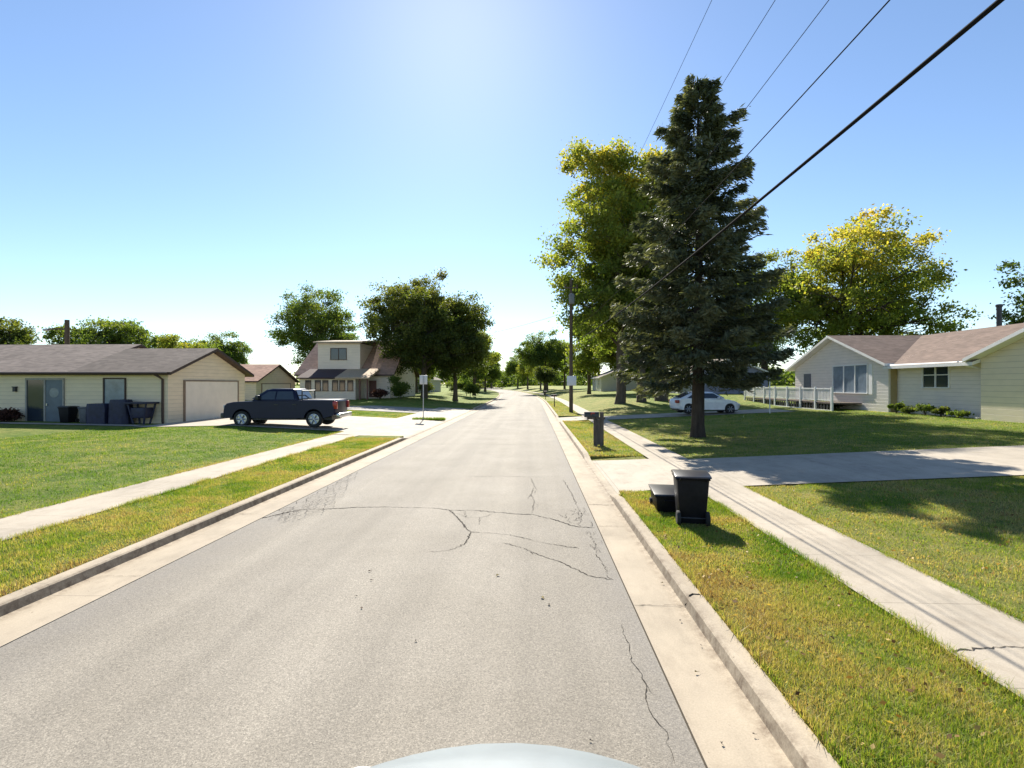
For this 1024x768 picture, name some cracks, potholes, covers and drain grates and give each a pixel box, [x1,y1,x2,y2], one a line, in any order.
crack [621,625,675,762]
crack [255,473,614,580]
